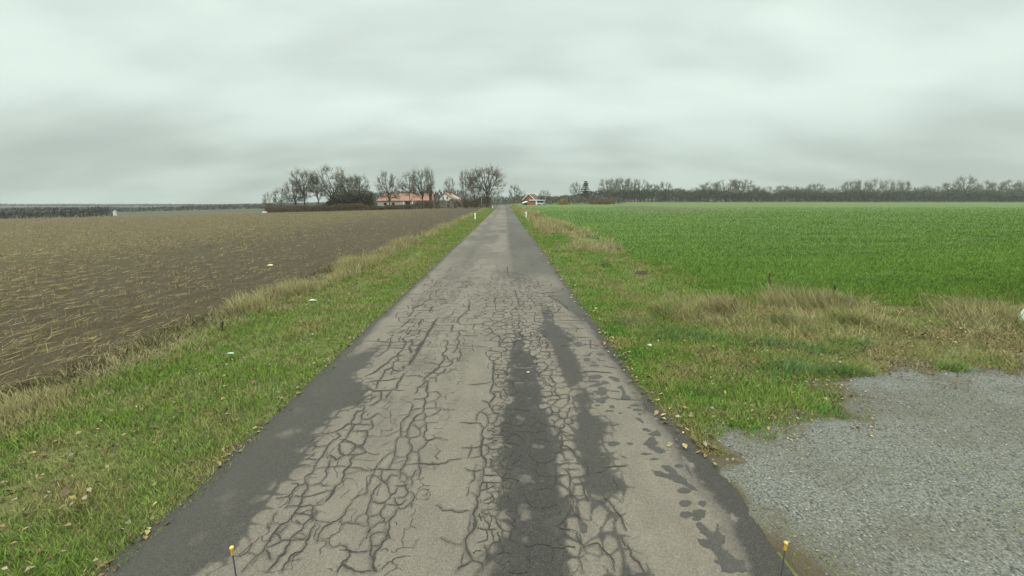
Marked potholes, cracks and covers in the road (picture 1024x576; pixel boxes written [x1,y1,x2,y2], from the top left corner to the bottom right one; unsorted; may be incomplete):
crack [235,229,644,576]
